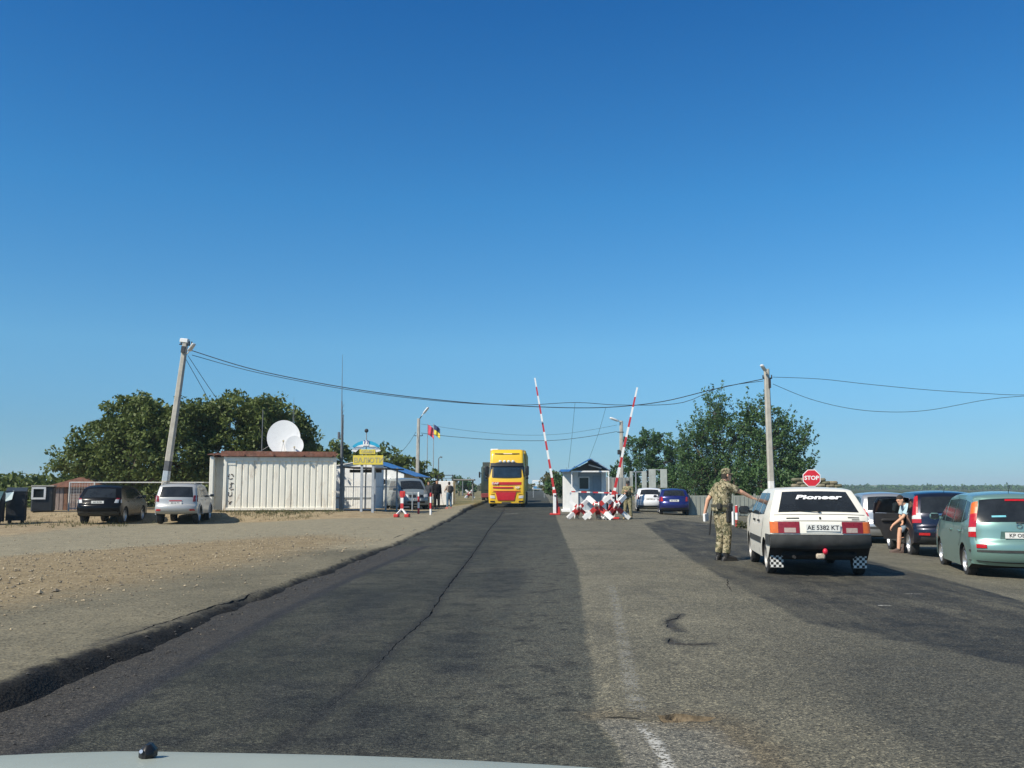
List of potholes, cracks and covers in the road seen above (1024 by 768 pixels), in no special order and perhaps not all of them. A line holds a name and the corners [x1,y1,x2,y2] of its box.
pothole [657,714,714,723]
crack [666,614,707,646]
crack [274,512,503,752]
